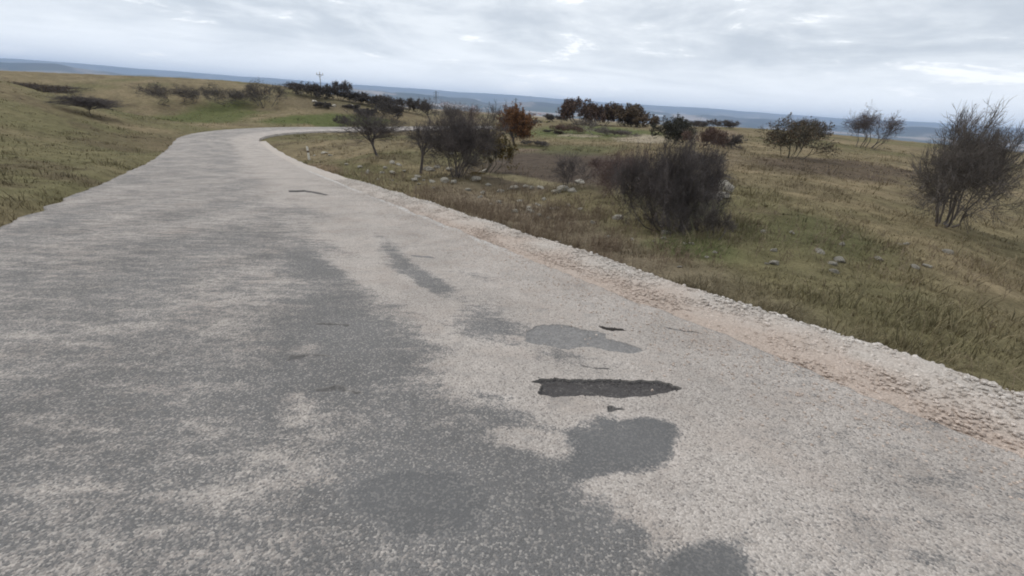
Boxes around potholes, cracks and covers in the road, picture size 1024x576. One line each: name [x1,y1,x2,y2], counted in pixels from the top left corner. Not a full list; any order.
pothole [531,377,682,399]
